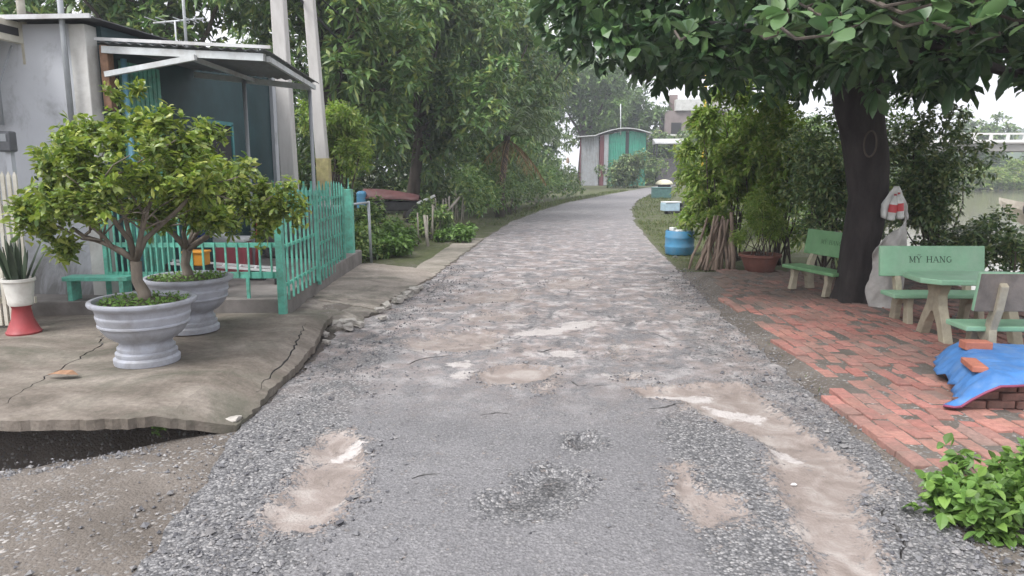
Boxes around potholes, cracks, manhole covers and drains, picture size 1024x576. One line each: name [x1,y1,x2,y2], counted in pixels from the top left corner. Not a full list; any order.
pothole [632,382,884,576]
pothole [477,364,560,384]
crack [257,324,306,392]
pothole [478,467,591,519]
crack [1,335,104,406]
pothole [562,434,603,450]
pothole [261,429,365,532]
